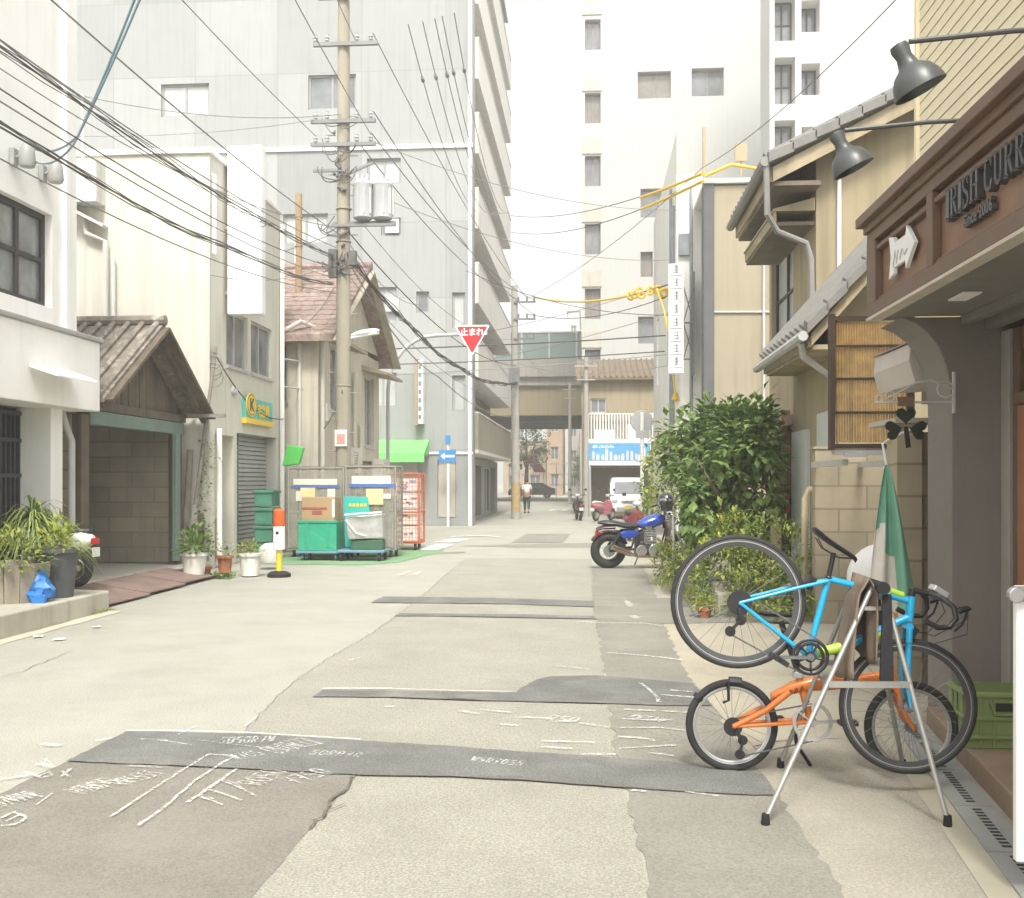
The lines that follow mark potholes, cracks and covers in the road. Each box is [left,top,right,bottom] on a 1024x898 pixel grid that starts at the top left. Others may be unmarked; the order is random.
crack [243,570,451,732]
